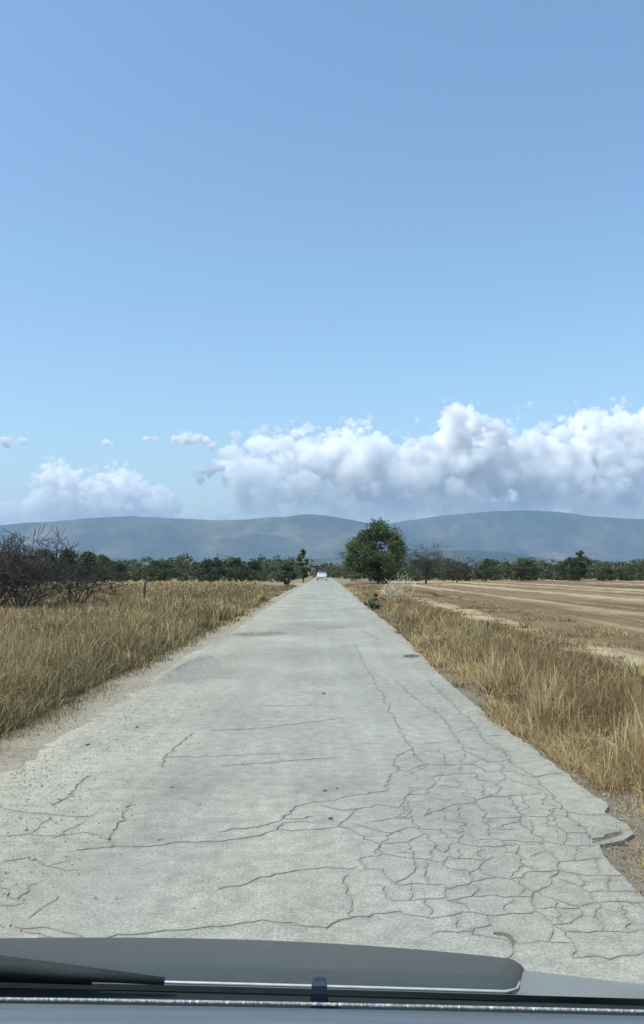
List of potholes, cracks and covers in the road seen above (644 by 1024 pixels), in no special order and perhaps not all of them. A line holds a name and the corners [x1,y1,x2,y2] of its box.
pothole [592,832,631,846]
crack [2,727,642,960]
crack [356,631,599,845]
